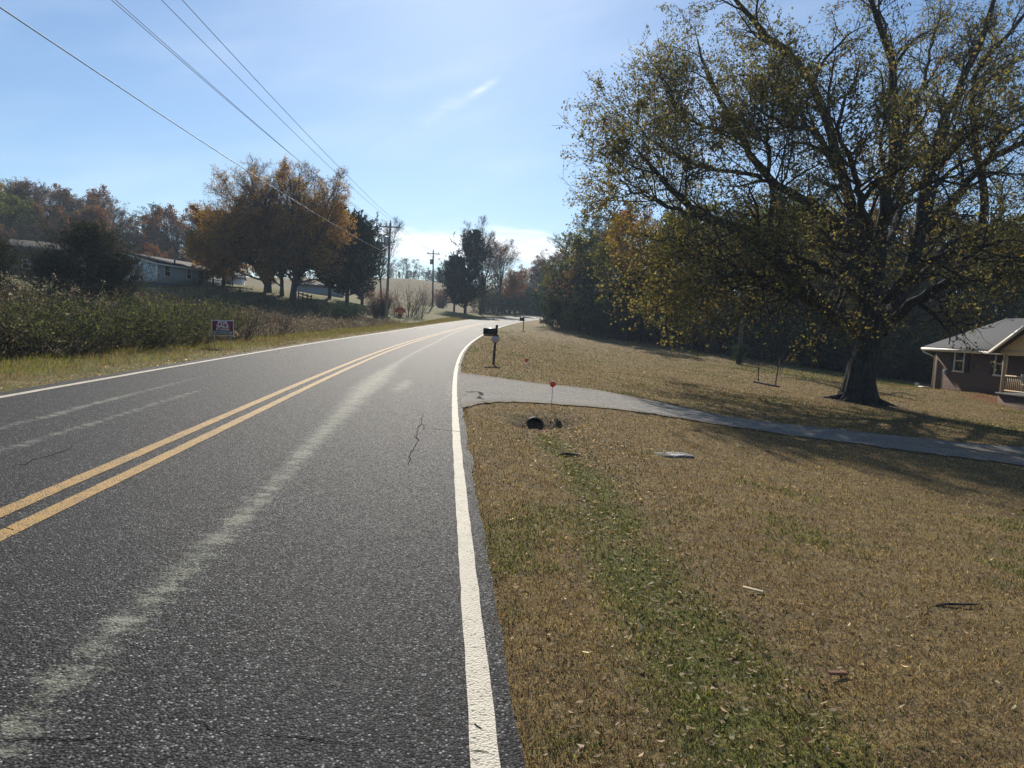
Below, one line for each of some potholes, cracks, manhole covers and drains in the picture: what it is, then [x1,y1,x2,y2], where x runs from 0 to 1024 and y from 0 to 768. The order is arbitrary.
crack [258,733,362,744]
crack [408,415,460,465]
